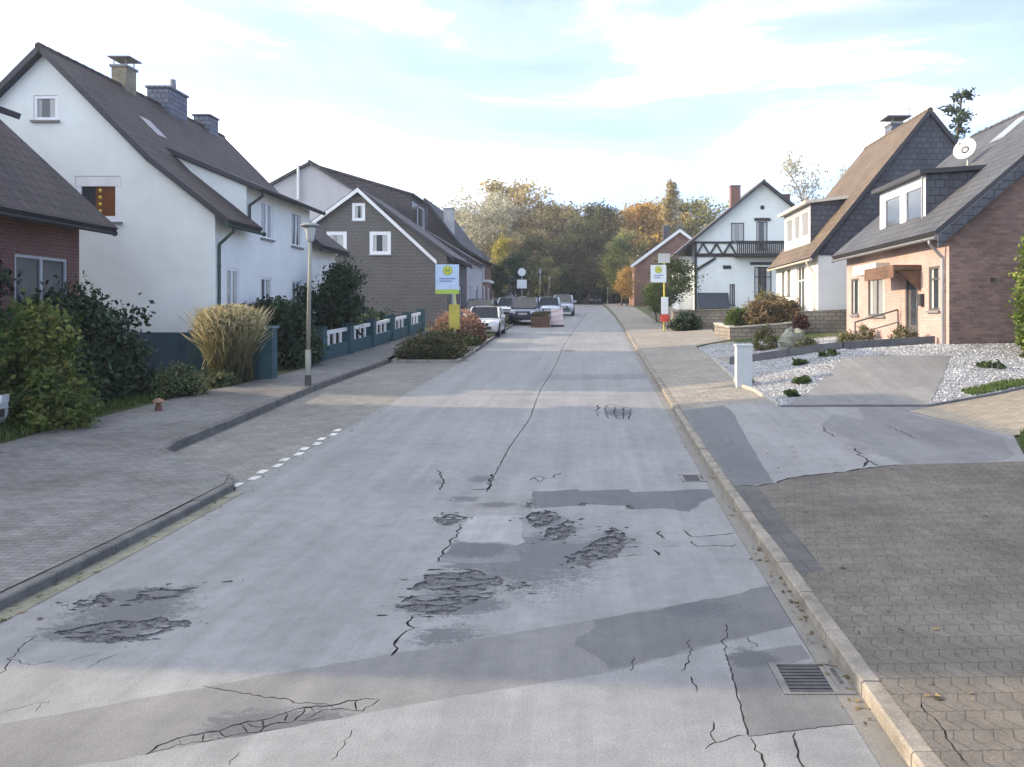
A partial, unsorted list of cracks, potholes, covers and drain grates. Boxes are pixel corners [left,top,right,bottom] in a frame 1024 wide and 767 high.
pothole [396,566,531,595]
crack [1,637,119,673]
pothole [558,525,636,568]
pothole [432,512,476,526]
crack [792,732,805,767]
crack [595,404,632,420]
crack [145,686,380,765]
pothole [55,616,208,648]
pothole [532,518,584,544]
pothole [106,579,243,608]
drain grate [768,662,857,700]
